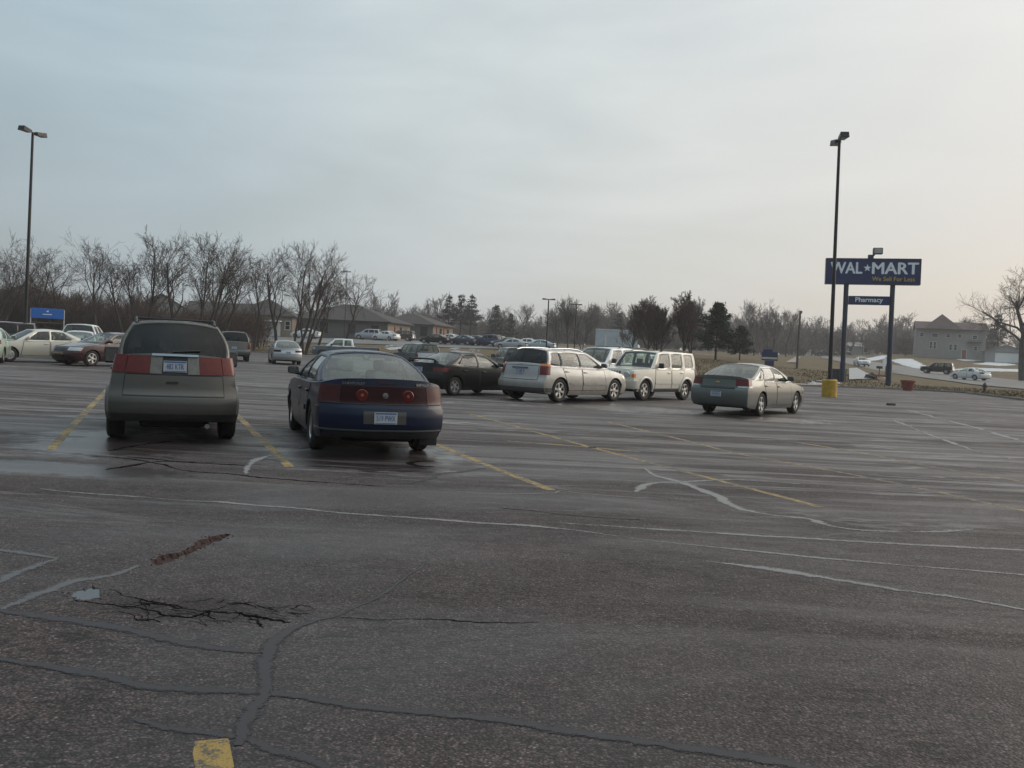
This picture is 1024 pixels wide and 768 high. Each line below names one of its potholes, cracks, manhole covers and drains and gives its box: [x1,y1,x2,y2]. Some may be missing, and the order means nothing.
pothole [150,534,234,566]
crack [76,589,316,627]
